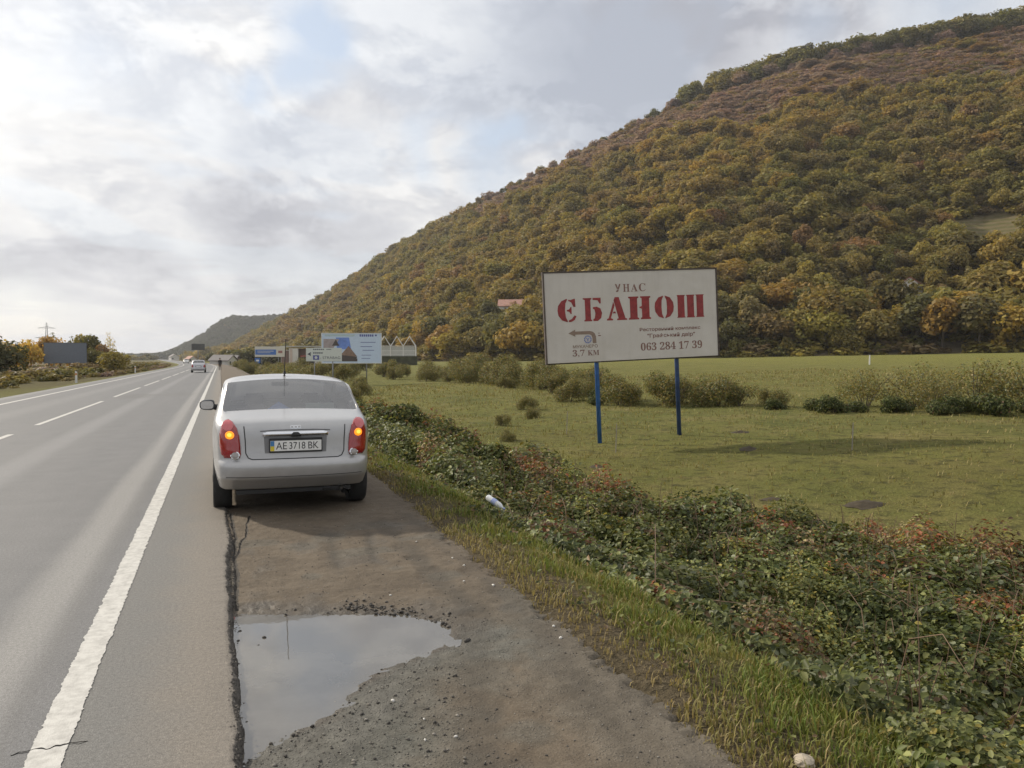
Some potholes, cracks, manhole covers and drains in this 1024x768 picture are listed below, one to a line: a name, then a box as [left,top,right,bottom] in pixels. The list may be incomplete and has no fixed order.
crack [228,513,251,611]
pothole [233,608,463,768]
crack [10,741,87,756]
